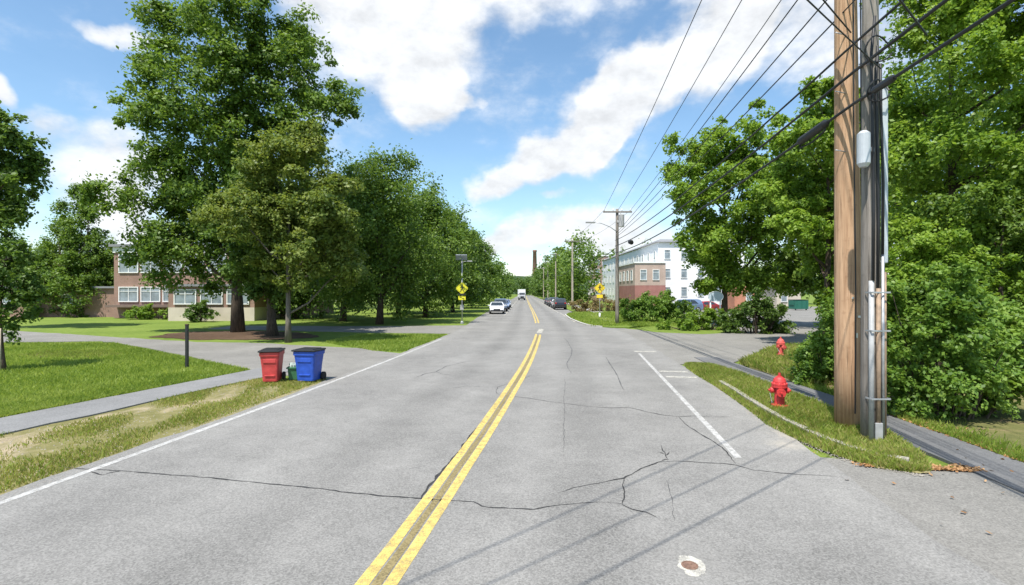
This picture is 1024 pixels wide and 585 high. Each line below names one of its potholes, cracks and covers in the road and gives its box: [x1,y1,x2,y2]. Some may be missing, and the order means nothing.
manhole cover [677,555,705,577]
crack [66,445,827,519]
